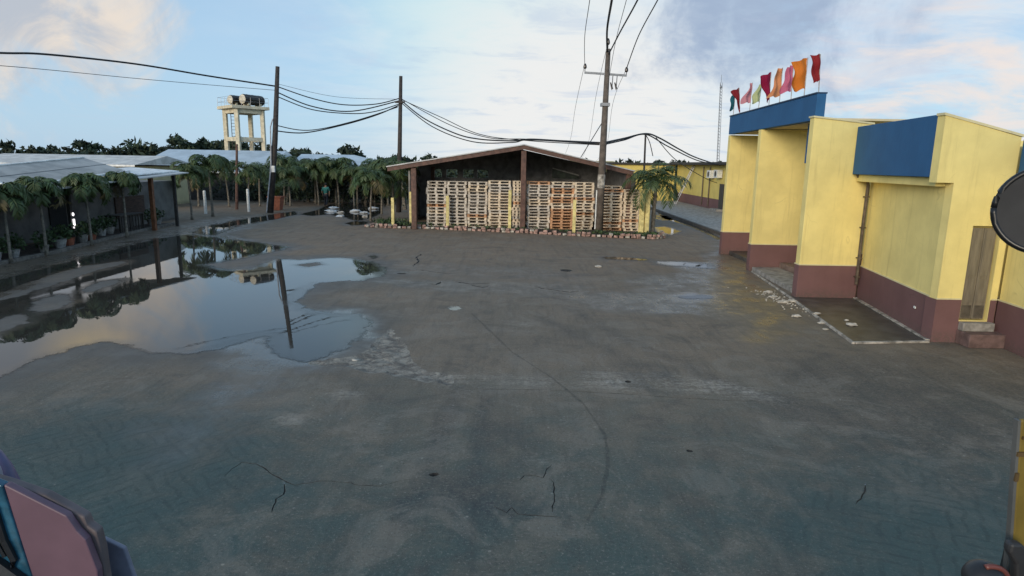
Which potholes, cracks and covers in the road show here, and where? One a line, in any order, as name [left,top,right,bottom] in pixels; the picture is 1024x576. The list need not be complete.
crack [229,462,405,511]
crack [497,467,561,518]
crack [413,253,489,288]
